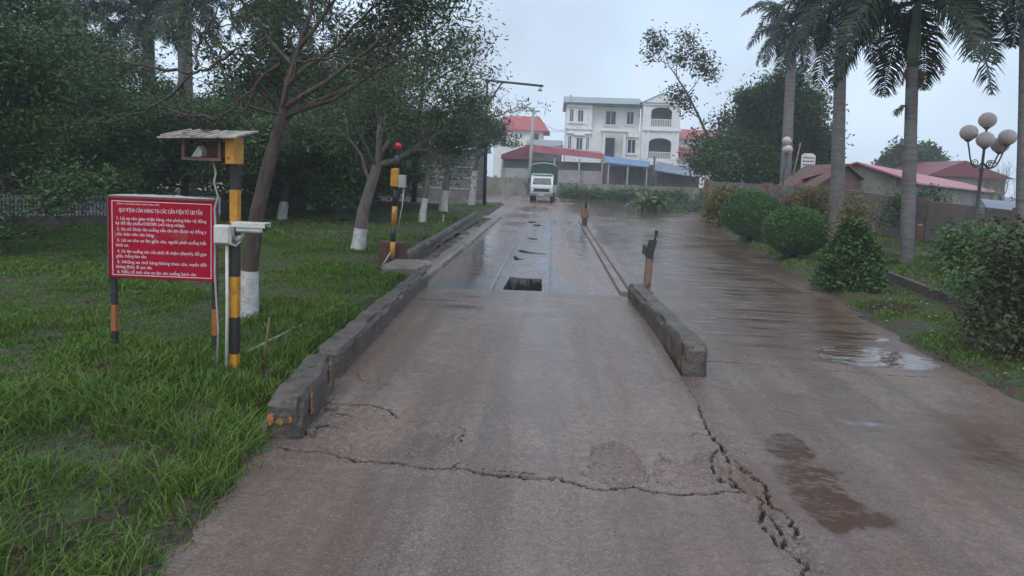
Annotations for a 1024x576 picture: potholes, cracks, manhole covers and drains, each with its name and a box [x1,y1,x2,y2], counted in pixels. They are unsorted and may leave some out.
crack [282,405,808,576]
